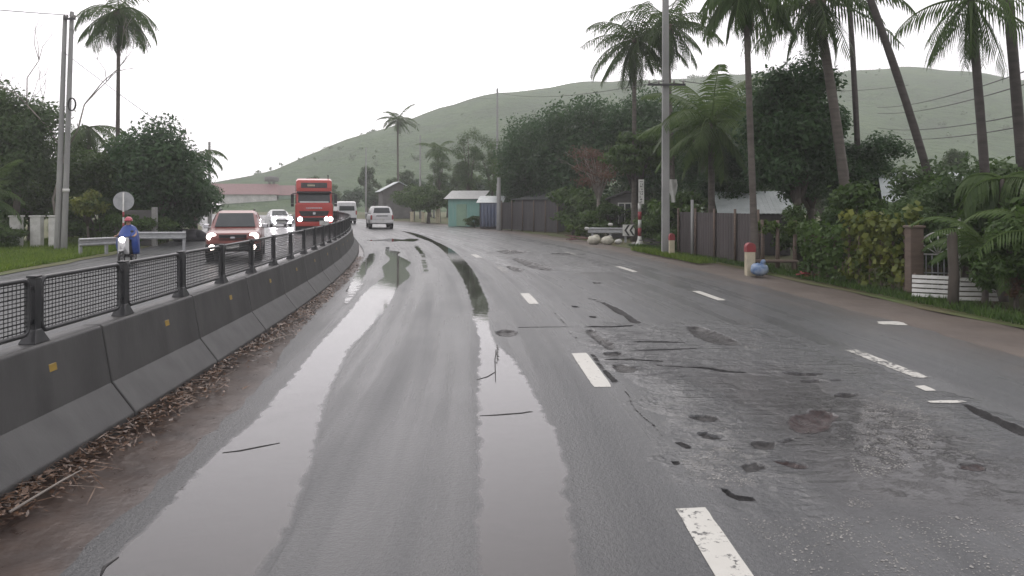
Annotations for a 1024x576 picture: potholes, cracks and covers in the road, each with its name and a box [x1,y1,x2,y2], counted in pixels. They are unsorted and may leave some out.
pothole [748,441,776,450]
pothole [773,459,809,469]
pothole [786,409,839,434]
pothole [495,329,519,337]
pothole [741,462,767,472]
pothole [697,432,722,440]
pothole [957,463,986,471]
pothole [686,326,742,346]
